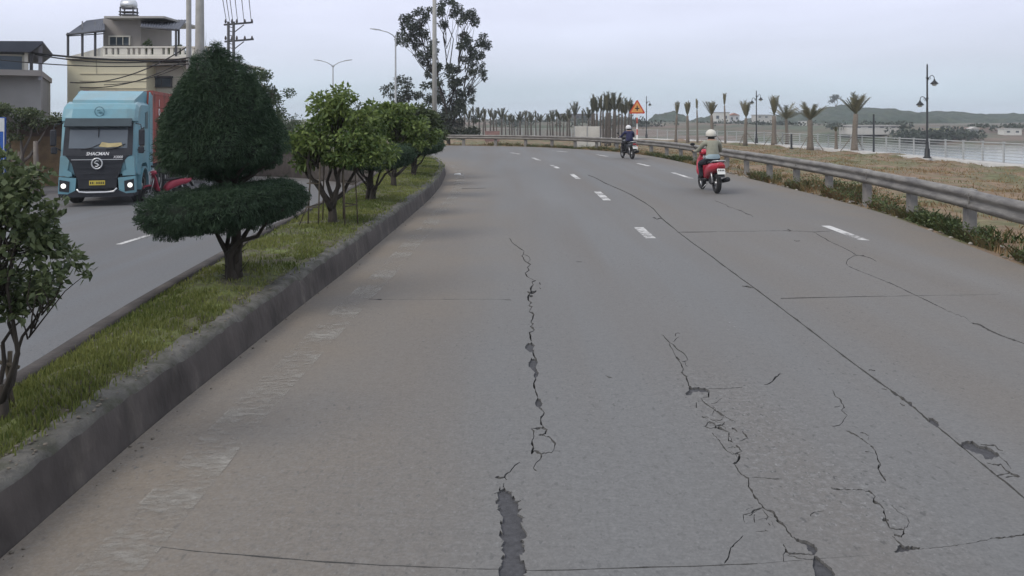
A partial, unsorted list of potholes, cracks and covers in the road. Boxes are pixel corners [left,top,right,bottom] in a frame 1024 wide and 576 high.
pothole [494,486,527,576]
pothole [959,441,1020,478]
crack [495,238,560,486]
crack [589,175,1024,576]
